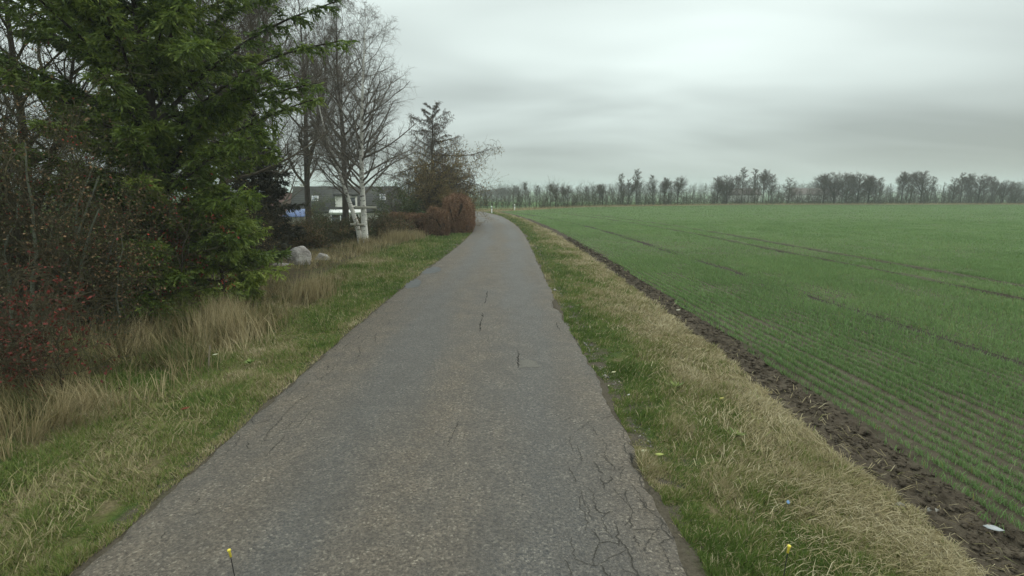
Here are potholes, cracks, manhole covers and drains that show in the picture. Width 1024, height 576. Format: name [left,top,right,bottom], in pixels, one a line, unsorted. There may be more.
crack [565,411,689,576]
crack [208,300,402,462]
